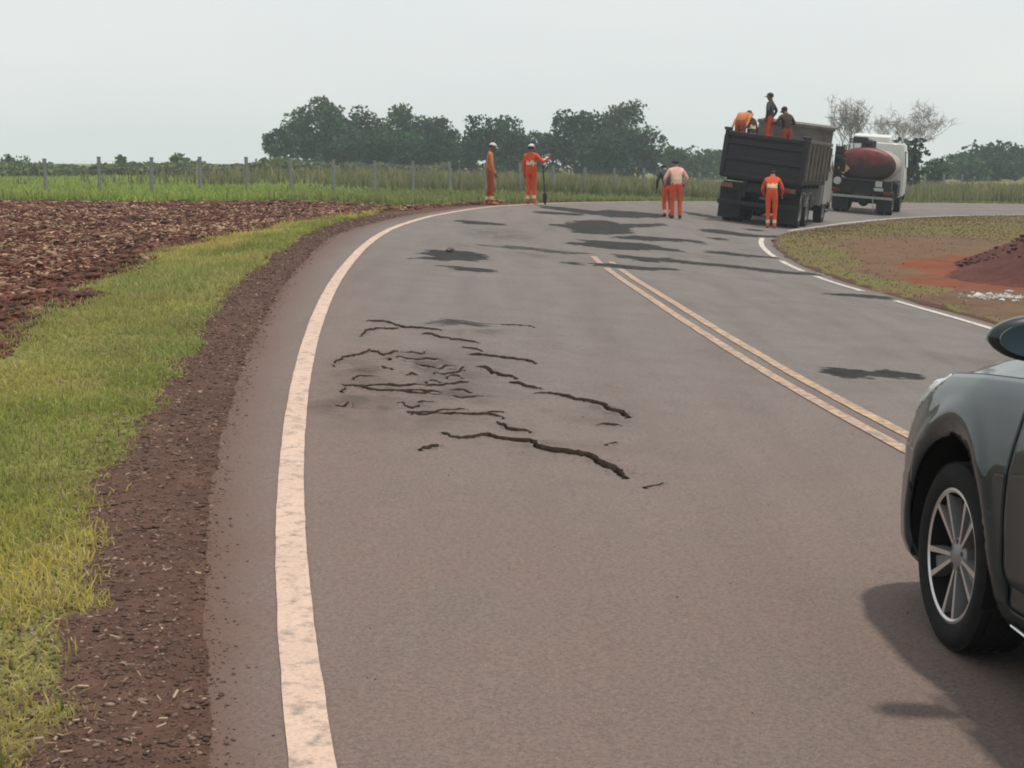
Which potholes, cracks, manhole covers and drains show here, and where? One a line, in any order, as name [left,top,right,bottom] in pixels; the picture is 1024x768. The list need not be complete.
crack [328,320,667,489]
